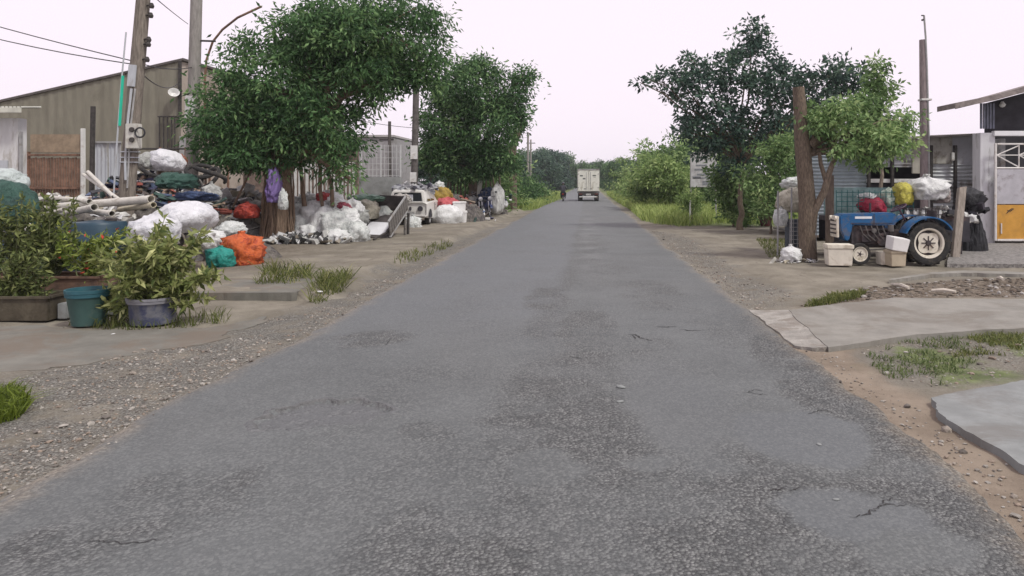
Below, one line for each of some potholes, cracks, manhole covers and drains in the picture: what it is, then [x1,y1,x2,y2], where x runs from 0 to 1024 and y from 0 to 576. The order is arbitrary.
pothole [244,396,400,432]
crack [856,498,908,517]
